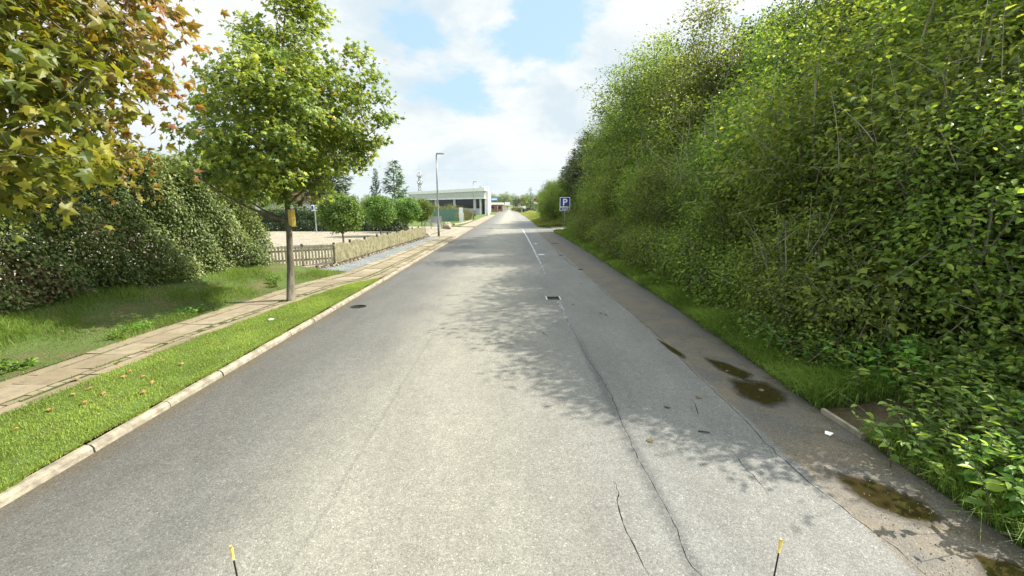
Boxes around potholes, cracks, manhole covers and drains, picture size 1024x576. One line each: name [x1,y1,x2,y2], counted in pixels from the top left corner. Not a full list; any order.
crack [556,250,927,576]
